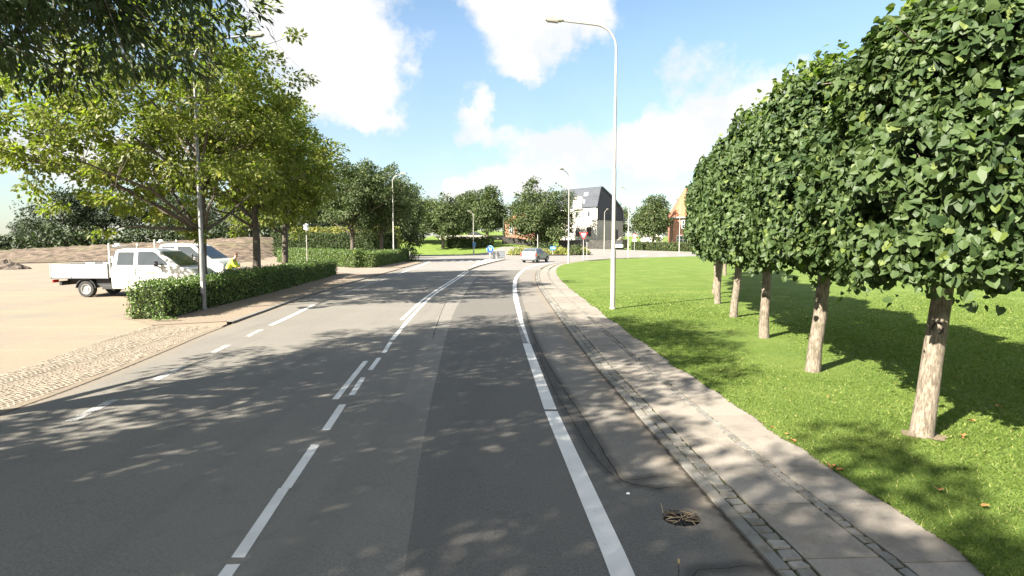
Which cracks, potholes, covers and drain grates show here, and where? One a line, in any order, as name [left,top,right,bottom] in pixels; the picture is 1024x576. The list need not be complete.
drain grate [662,510,701,527]
